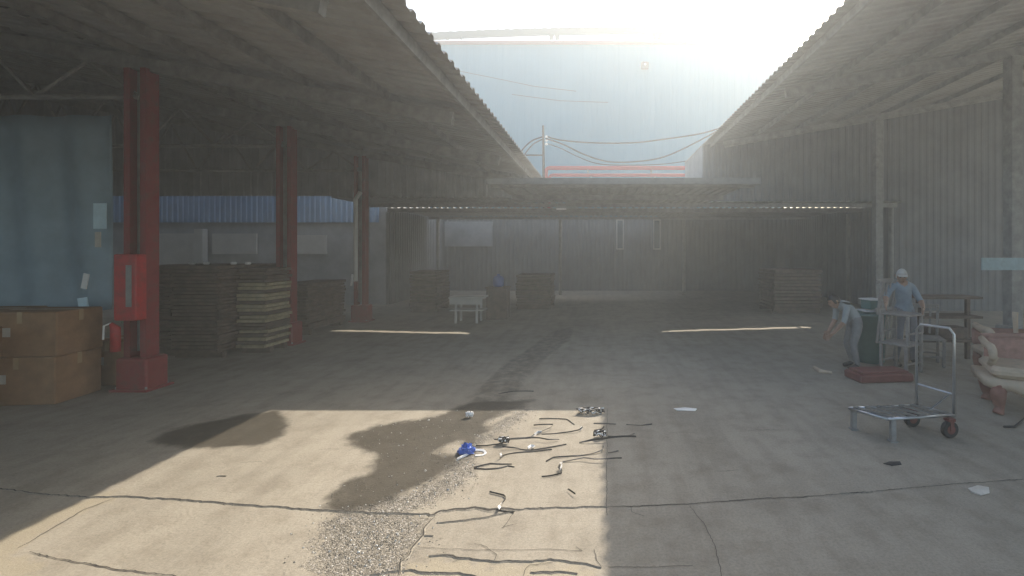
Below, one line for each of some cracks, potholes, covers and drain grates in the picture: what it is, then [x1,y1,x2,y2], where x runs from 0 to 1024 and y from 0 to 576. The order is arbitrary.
crack [370,410,721,576]
